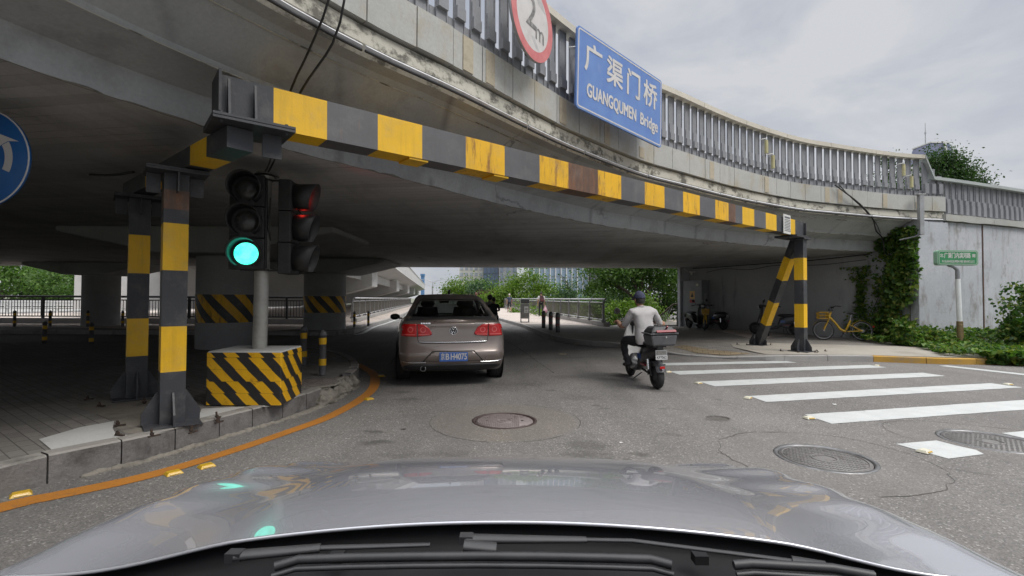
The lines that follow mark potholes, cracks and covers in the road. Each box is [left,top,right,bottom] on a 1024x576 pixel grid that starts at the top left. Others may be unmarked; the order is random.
manhole cover [935,429,1024,454]
manhole cover [472,413,537,429]
manhole cover [773,444,881,474]
crack [716,432,990,497]
